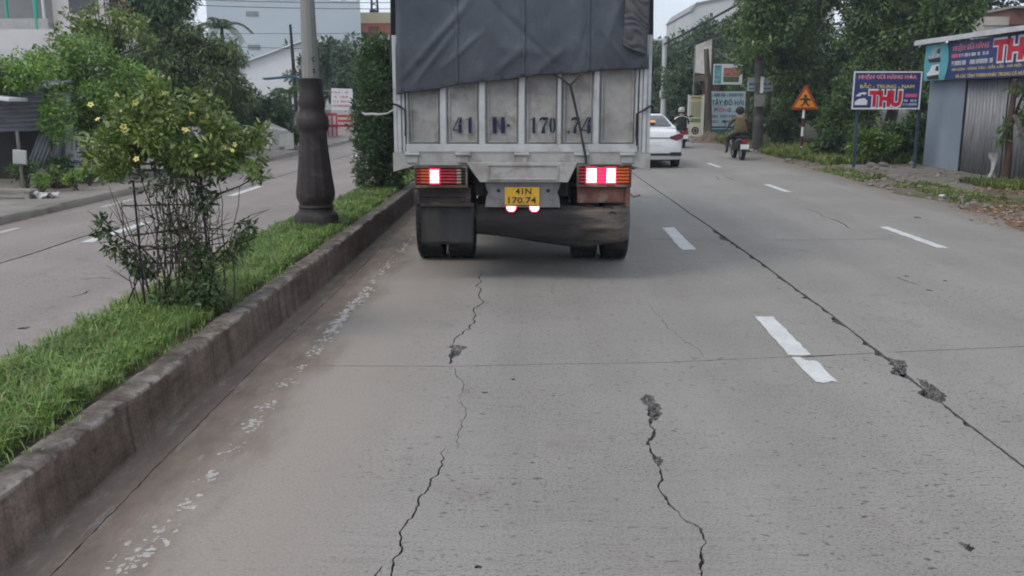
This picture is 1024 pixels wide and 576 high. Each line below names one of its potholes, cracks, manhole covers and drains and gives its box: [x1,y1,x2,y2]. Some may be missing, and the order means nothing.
crack [374,269,485,576]
crack [646,418,707,576]
